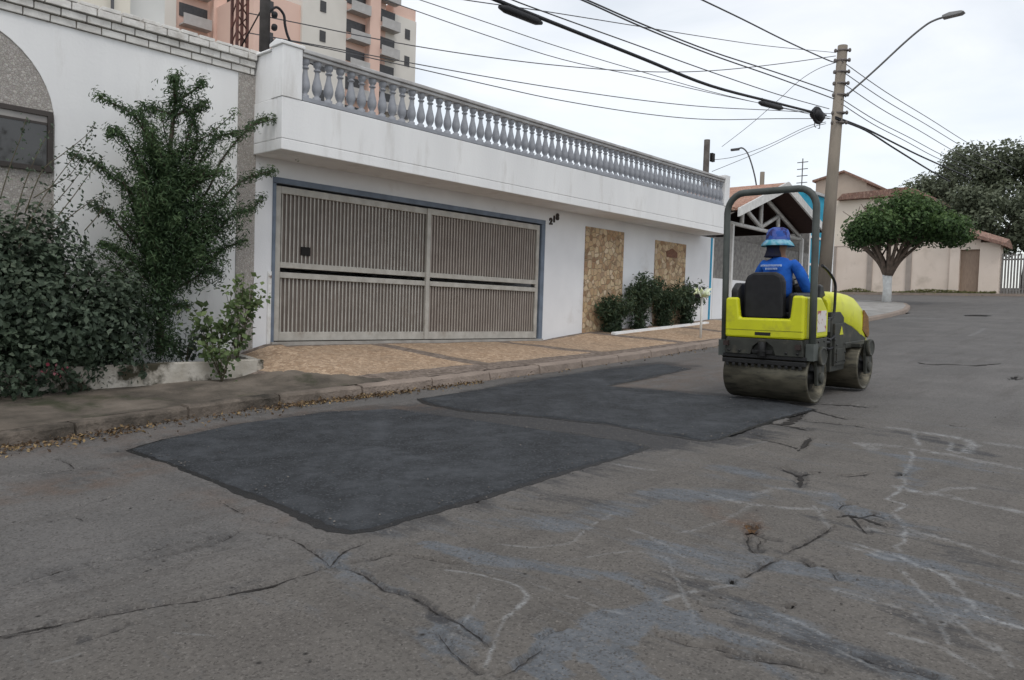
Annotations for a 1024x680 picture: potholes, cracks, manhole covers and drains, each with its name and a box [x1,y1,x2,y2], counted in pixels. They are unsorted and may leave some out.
crack [1,535,489,675]
crack [738,404,868,451]
crack [782,469,810,488]
crack [745,505,886,578]
